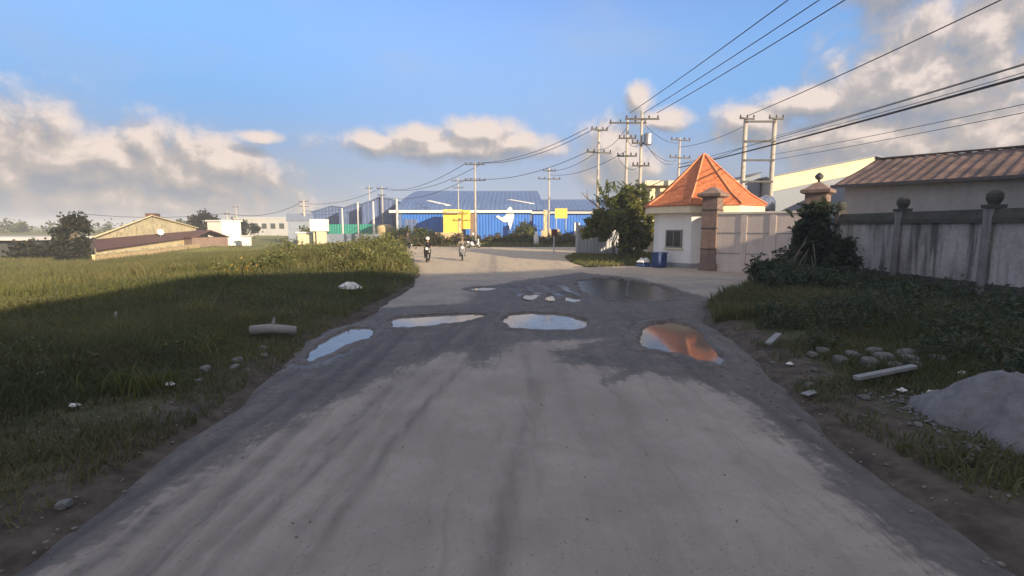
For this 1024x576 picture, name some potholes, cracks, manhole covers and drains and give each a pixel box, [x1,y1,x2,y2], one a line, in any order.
pothole [553,294,590,303]
pothole [537,293,566,303]
pothole [624,317,747,370]
pothole [515,293,550,302]
pothole [568,277,685,303]
pothole [283,324,386,368]
pothole [489,310,600,332]
pothole [375,311,498,330]
